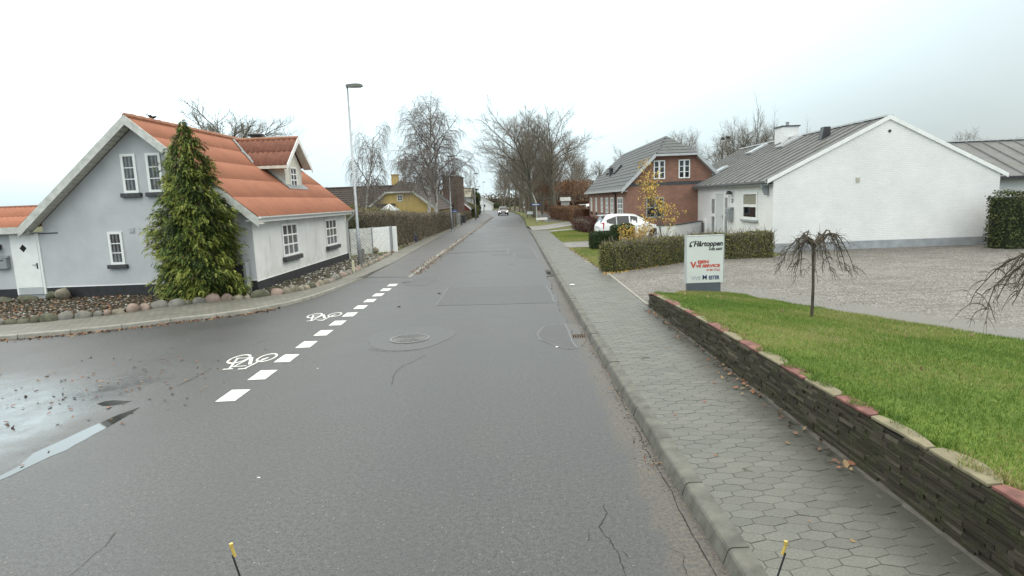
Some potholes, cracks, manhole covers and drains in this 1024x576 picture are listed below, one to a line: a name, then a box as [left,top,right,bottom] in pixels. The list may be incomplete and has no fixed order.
crack [614,387,717,576]
crack [588,503,628,575]
manhole cover [390,334,430,343]
